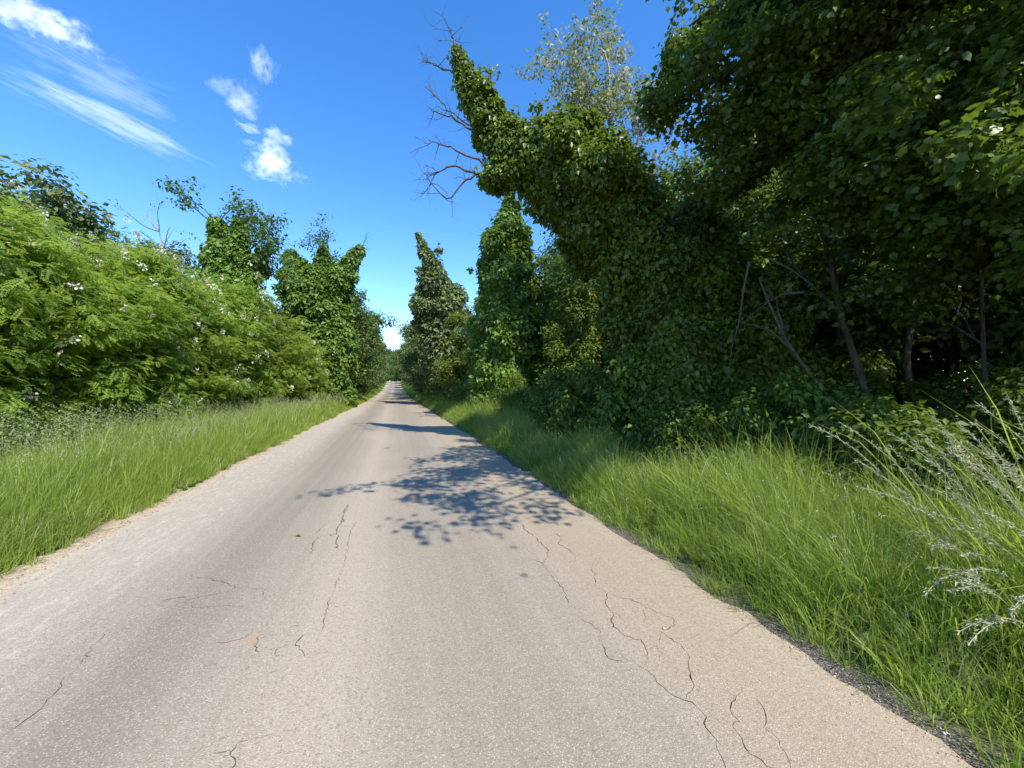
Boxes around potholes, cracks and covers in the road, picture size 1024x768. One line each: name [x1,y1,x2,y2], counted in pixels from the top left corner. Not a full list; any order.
crack [582,570,791,768]
crack [8,633,105,733]
crack [519,522,576,602]
crack [223,505,356,674]
